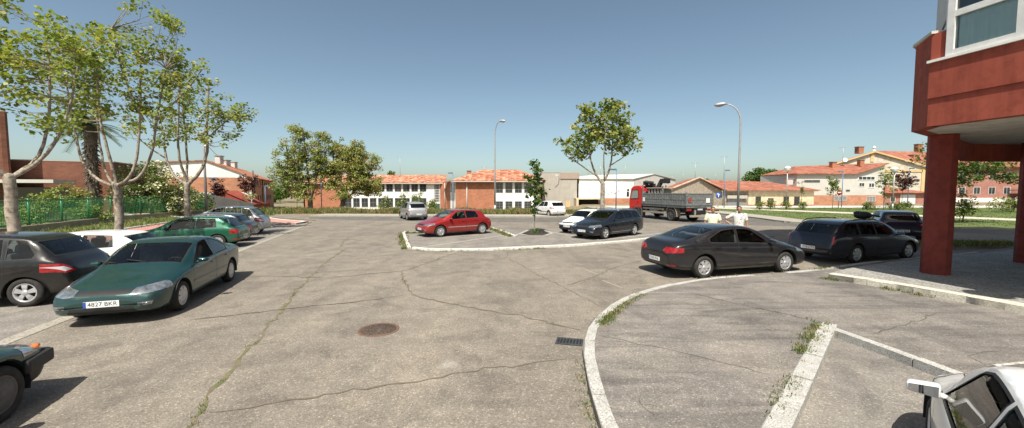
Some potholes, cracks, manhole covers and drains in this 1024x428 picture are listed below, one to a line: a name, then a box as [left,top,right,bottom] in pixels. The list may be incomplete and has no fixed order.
drain grate [555,337,584,346]
crack [186,233,578,428]
crack [506,253,640,307]
manhole cover [357,323,399,337]
